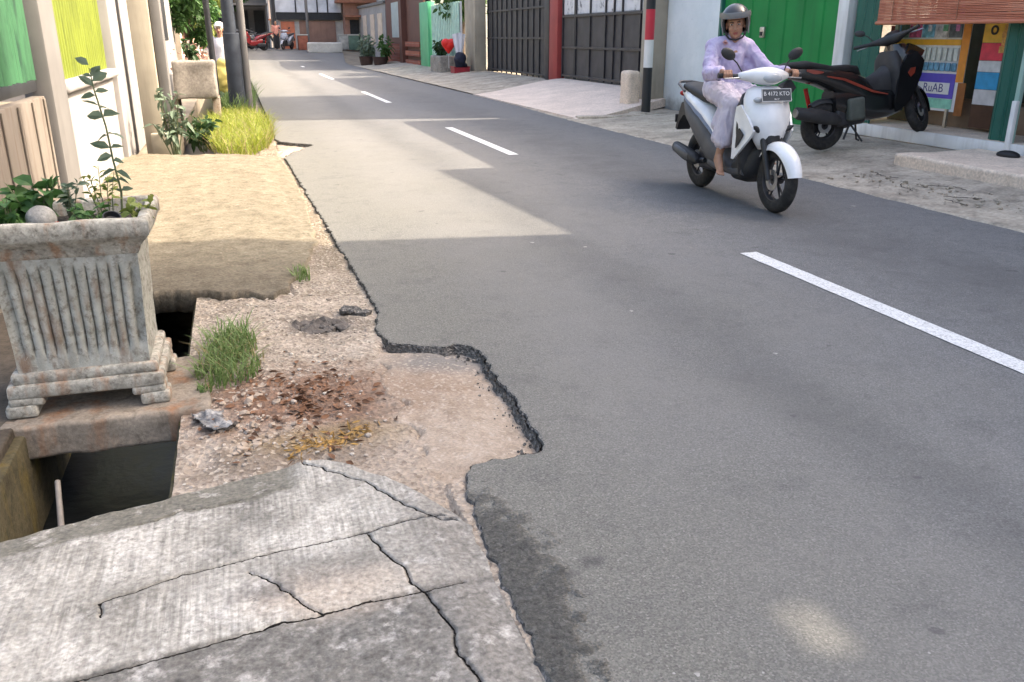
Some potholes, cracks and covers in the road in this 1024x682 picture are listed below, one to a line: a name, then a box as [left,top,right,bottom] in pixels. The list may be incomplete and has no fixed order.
pothole [275,141,312,158]
crack [74,461,481,682]
crack [875,172,982,206]
pothole [368,340,541,484]
